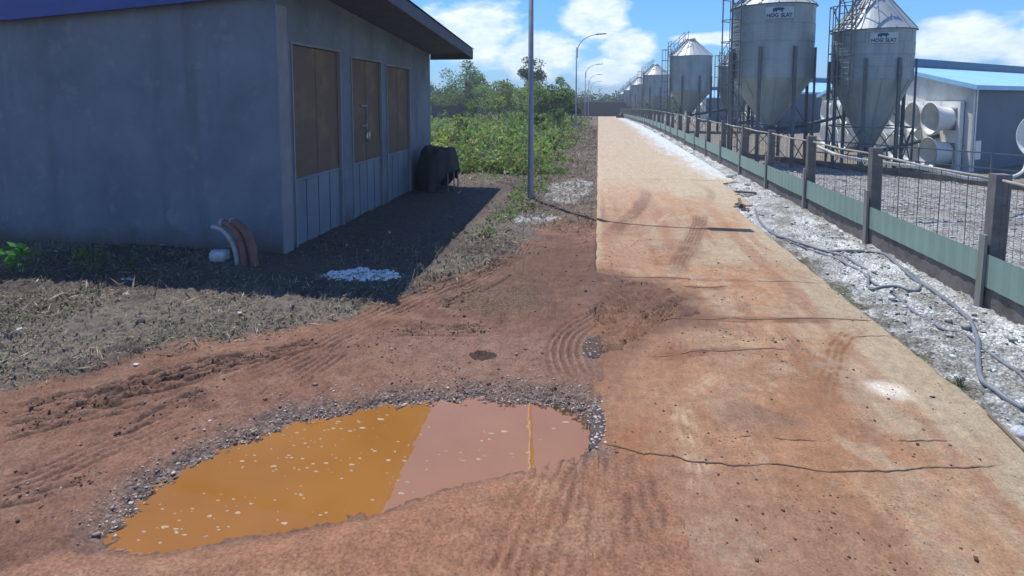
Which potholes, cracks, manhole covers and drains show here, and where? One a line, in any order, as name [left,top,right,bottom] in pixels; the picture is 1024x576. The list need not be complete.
crack [654,348,787,357]
pothole [26,357,607,560]
crack [597,444,1002,472]
